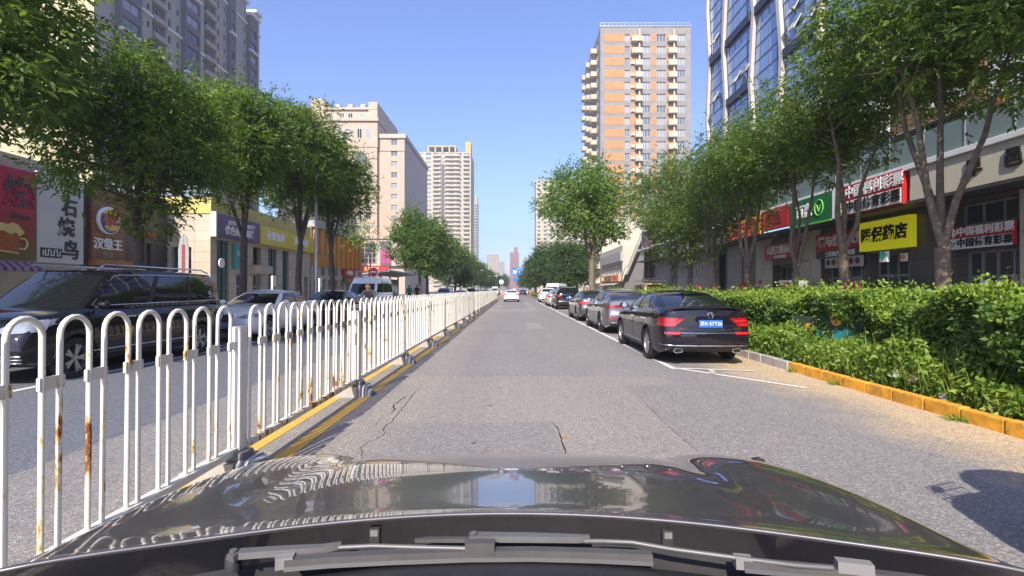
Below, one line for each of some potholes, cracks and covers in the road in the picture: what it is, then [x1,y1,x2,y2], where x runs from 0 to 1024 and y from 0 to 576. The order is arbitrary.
crack [360,385,423,456]
